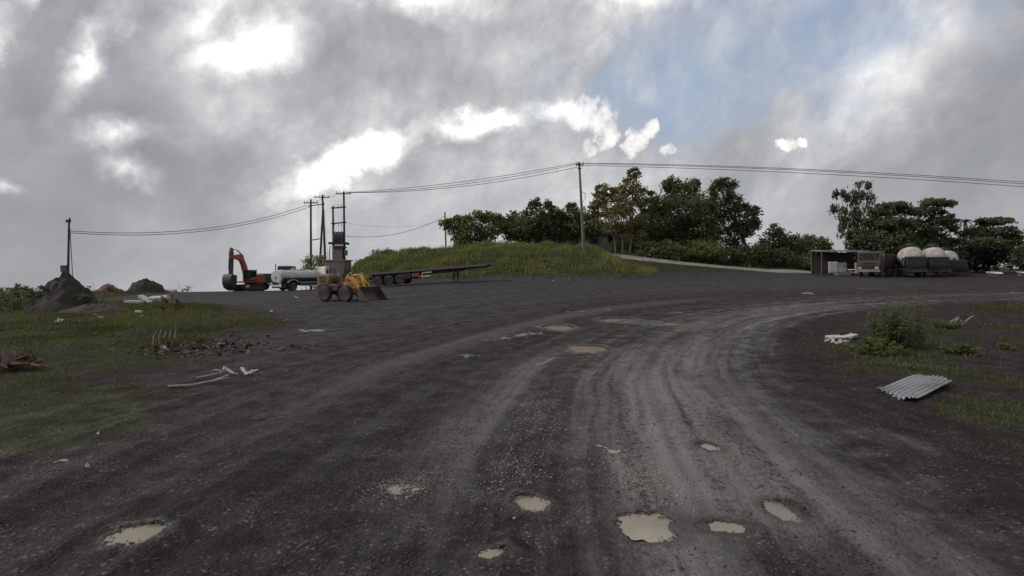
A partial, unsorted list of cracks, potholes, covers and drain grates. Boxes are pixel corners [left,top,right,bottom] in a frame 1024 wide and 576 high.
pothole [592,502,711,556]
pothole [668,510,770,546]
pothole [489,484,572,523]
pothole [738,490,840,536]
pothole [522,322,594,334]
pothole [579,316,665,326]
pothole [547,343,629,356]
pothole [72,510,197,561]
pothole [456,533,536,573]
pothole [618,319,704,329]
